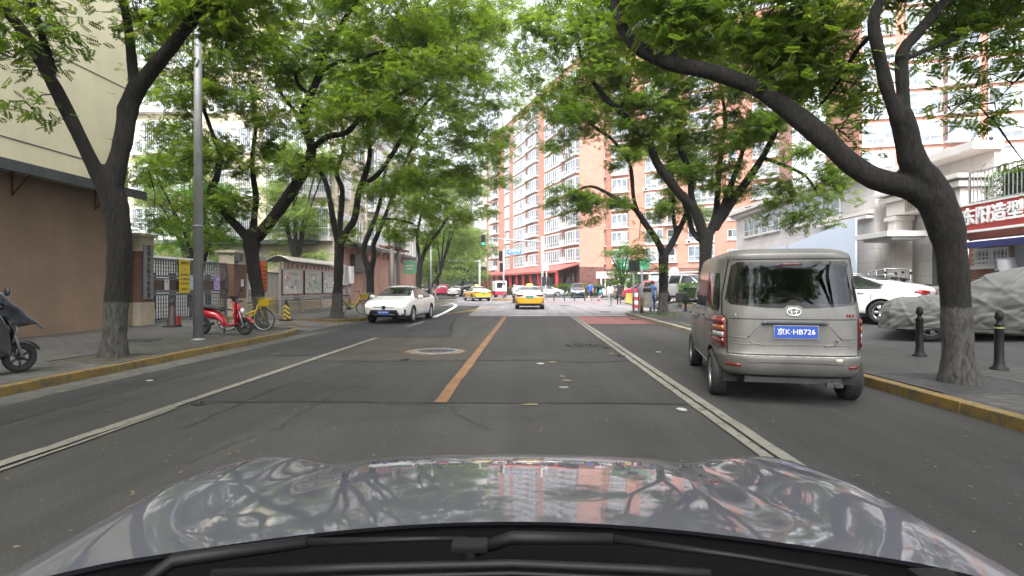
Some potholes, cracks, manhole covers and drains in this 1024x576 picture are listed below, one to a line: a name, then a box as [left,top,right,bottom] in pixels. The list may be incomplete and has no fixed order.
crack [186,362,387,463]
